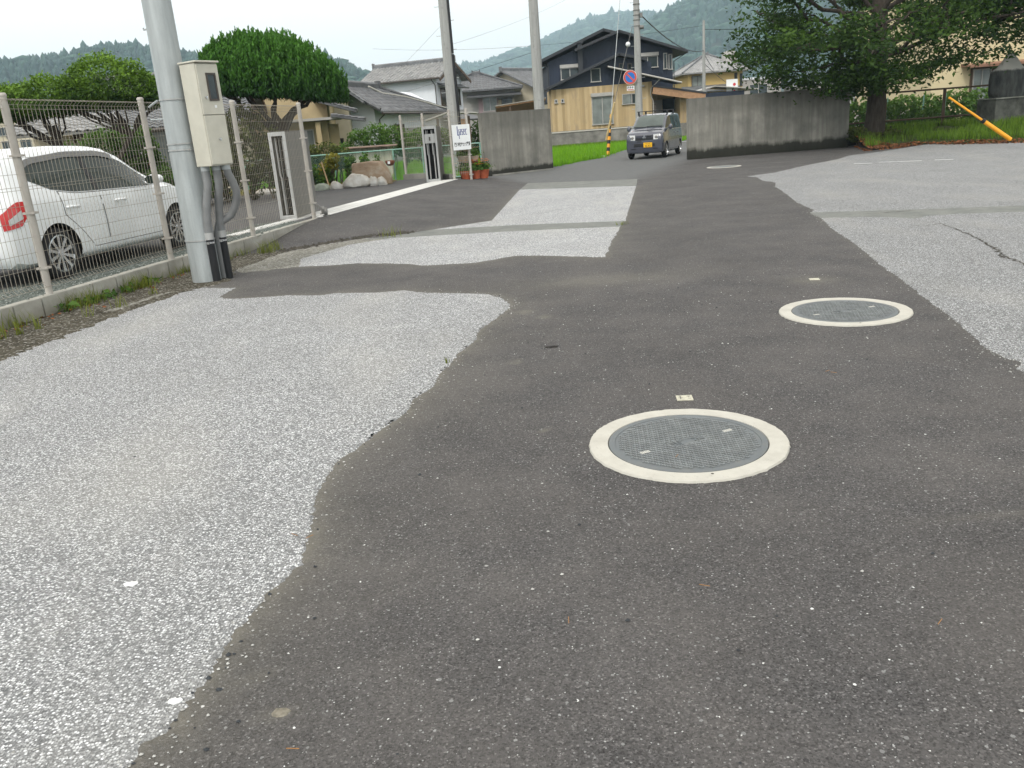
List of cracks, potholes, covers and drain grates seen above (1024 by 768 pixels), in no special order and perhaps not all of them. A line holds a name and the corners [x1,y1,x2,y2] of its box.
manhole cover [589,409,790,484]
crack [870,210,1024,265]
manhole cover [779,298,914,327]
